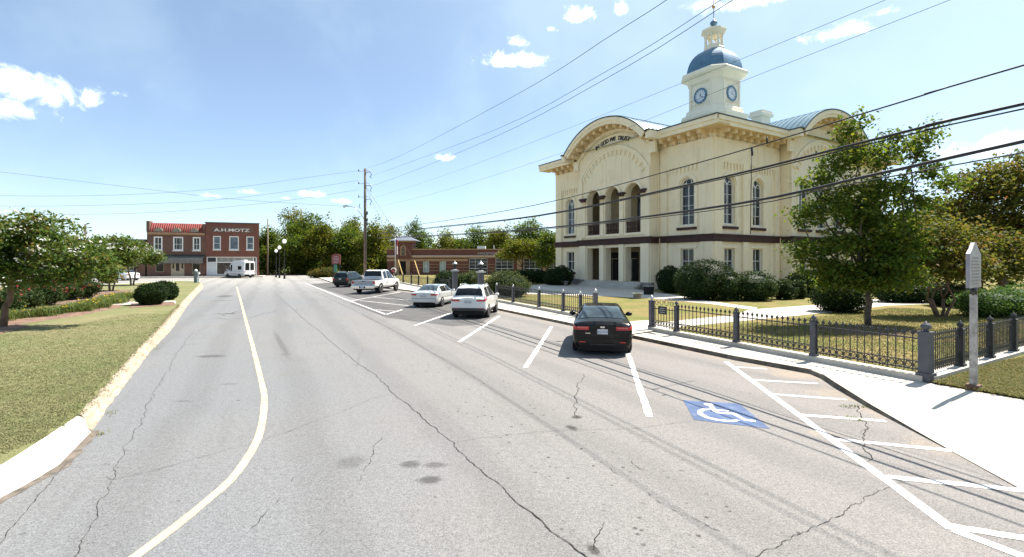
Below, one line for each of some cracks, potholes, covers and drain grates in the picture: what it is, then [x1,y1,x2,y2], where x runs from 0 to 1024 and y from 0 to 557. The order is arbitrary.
crack [129,288,684,557]
crack [74,331,194,557]
crack [756,482,901,557]
